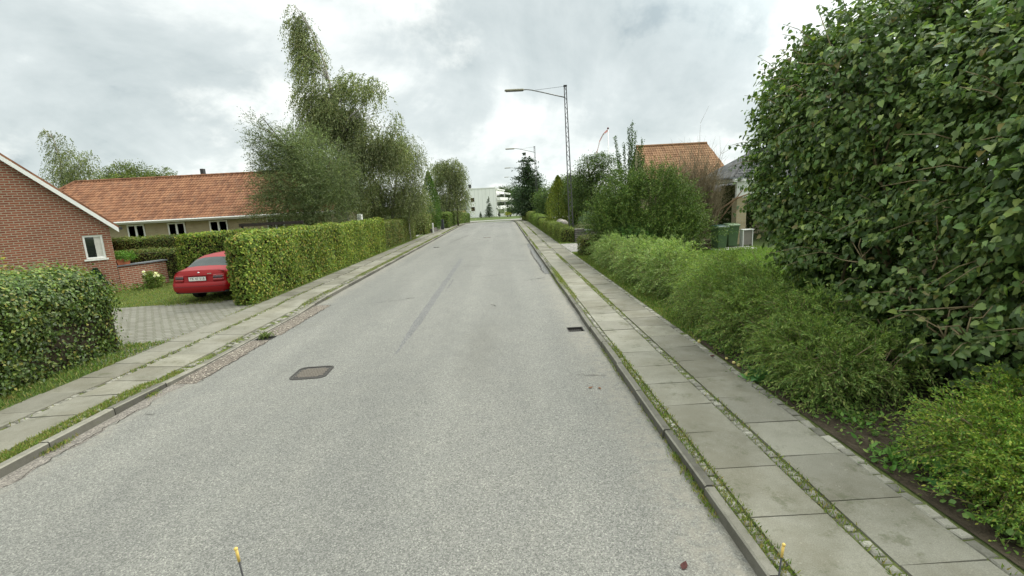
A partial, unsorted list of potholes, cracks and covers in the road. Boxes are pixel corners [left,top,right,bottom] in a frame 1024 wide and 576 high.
manhole cover [289,365,334,380]
